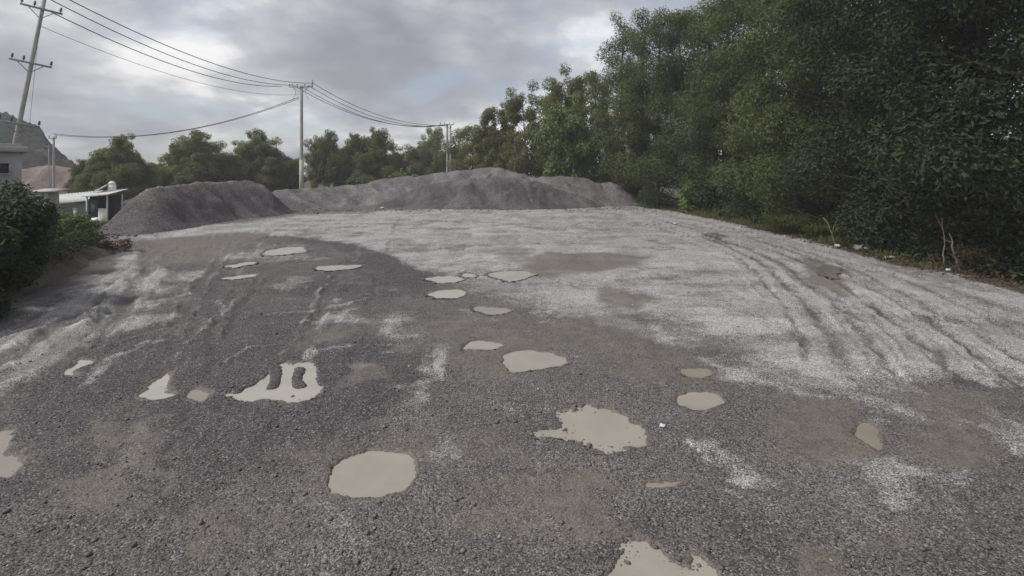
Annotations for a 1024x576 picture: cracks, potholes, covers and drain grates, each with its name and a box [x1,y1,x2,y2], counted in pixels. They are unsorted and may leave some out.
pothole [846,418,889,453]
pothole [471,303,516,316]
pothole [221,261,260,269]
pothole [313,263,366,272]
pothole [530,401,659,457]
pothole [483,270,538,283]
pothole [459,337,508,352]
pothole [60,357,97,378]
pothole [260,246,310,256]
pothole [0,424,30,481]
pothole [134,367,180,402]
pothole [180,385,217,404]
